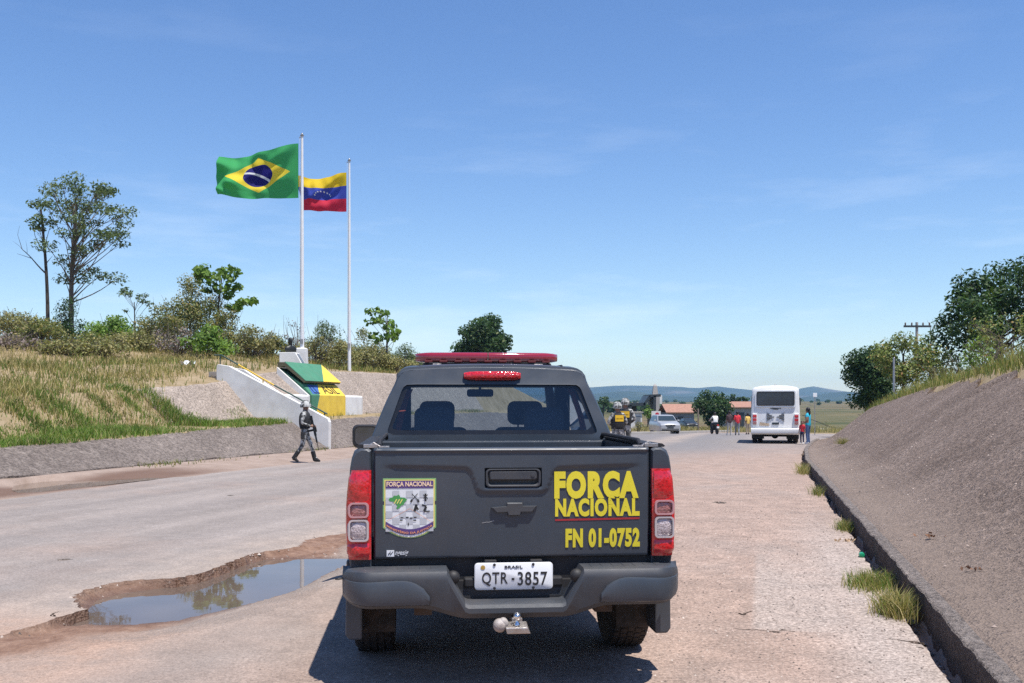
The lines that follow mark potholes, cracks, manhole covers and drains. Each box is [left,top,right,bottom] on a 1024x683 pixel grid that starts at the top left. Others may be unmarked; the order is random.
pothole [0,533,348,663]
